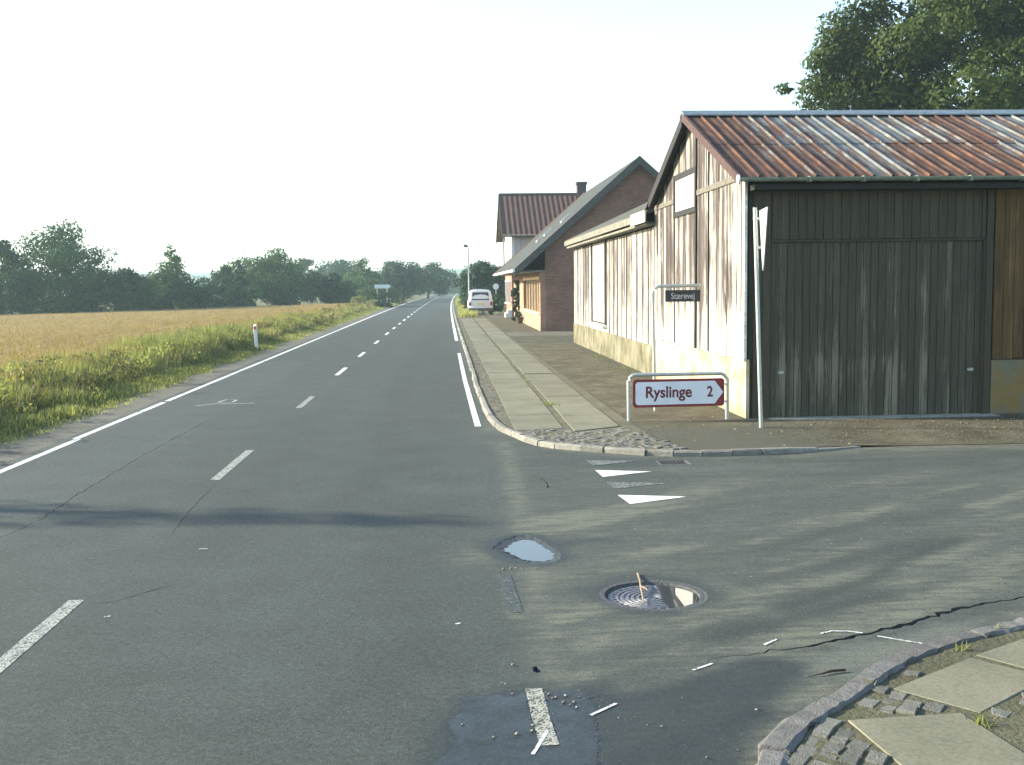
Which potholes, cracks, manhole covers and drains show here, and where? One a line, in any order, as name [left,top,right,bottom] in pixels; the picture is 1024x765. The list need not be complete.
crack [701,596,1024,662]
manhole cover [597,580,708,611]
pothole [492,535,561,564]
crack [2,422,206,537]
